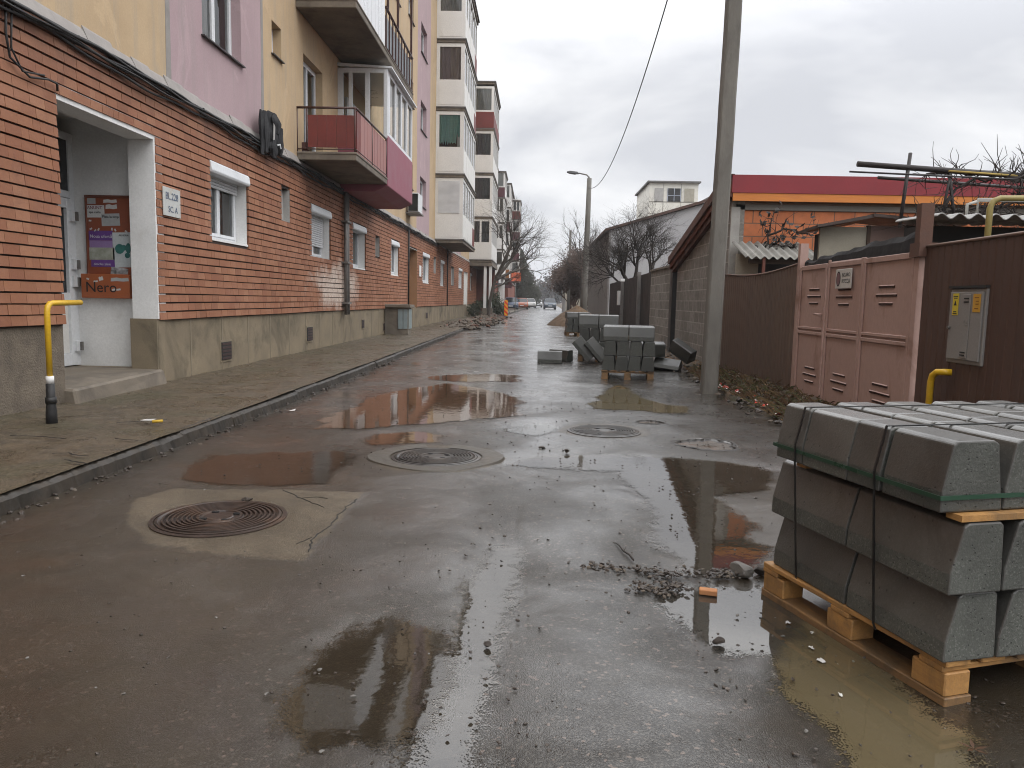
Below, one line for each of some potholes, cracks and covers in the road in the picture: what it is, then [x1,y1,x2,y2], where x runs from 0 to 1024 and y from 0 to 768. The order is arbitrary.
crack [282,489,357,552]
manhole cover [148,500,287,538]
manhole cover [366,443,505,472]
manhole cover [567,425,641,438]
